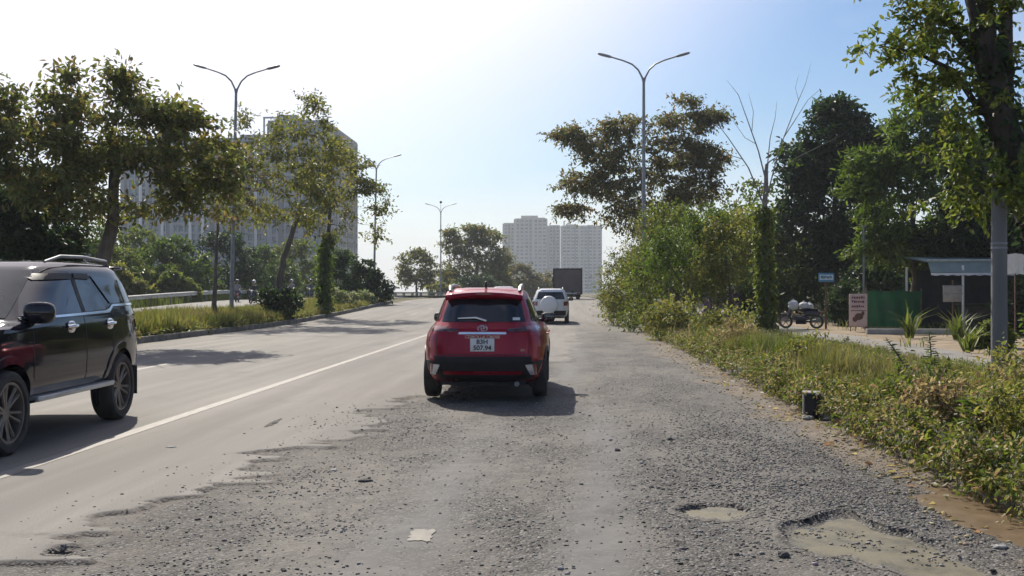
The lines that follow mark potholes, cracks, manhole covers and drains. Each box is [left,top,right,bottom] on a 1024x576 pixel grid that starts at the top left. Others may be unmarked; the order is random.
pothole [766,507,1018,576]
pothole [40,544,82,556]
pothole [665,501,765,522]
